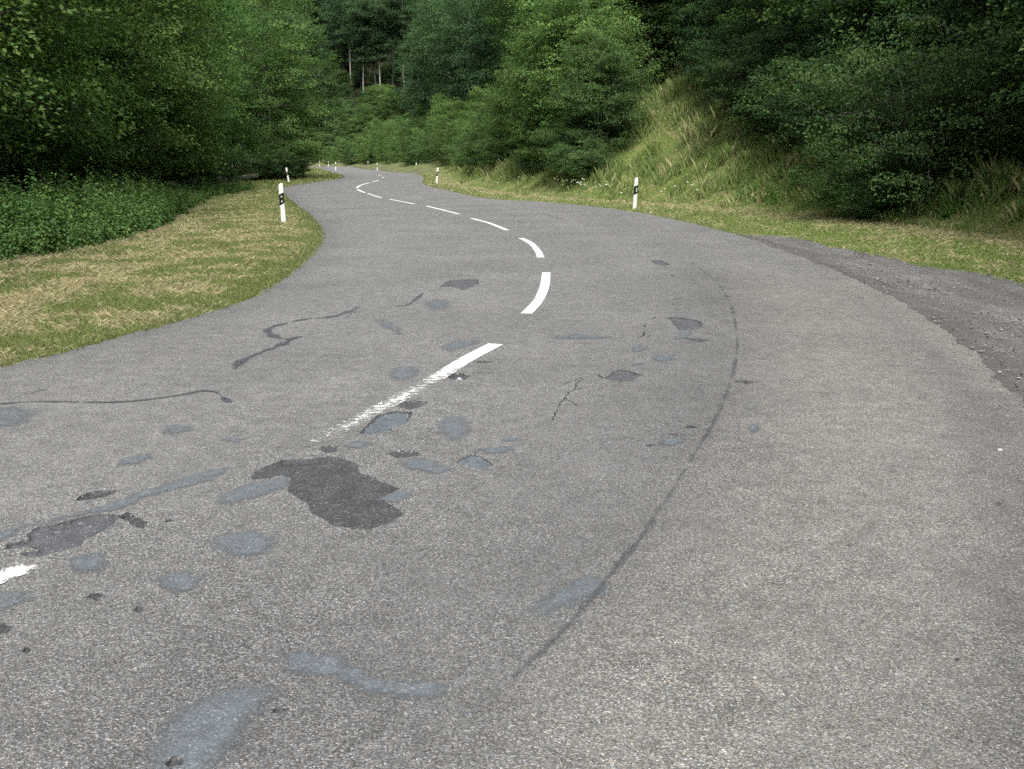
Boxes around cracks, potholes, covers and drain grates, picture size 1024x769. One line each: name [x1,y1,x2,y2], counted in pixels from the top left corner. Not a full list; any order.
pothole [387,450,421,458]
crack [552,375,593,421]
